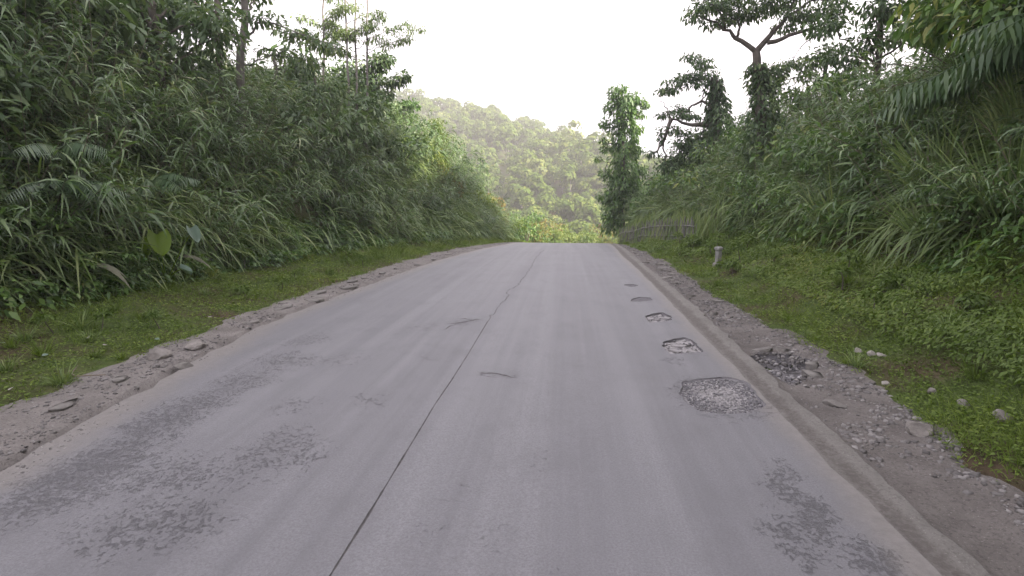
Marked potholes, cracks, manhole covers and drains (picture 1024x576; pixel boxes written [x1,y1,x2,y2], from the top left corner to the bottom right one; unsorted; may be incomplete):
pothole [751,352,810,385]
pothole [645,312,672,322]
pothole [679,377,766,414]
pothole [662,337,703,354]
crack [329,258,536,576]
